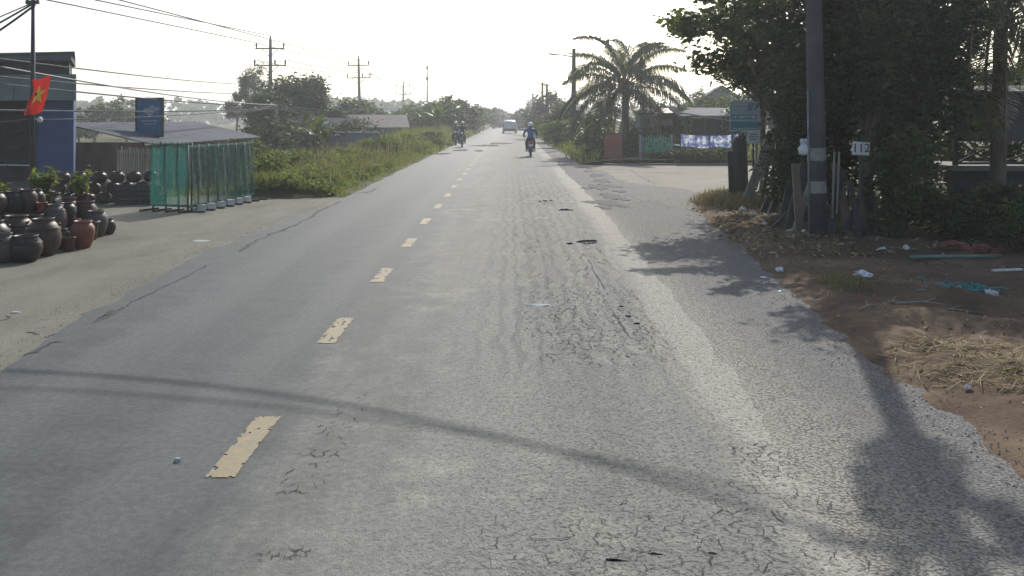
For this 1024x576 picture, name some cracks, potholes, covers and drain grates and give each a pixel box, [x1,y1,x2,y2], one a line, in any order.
crack [475,481,931,576]
crack [80,265,207,323]
crack [257,546,311,561]
crack [604,170,671,210]
crack [516,224,673,367]
crack [277,394,366,493]
crack [728,442,804,480]
